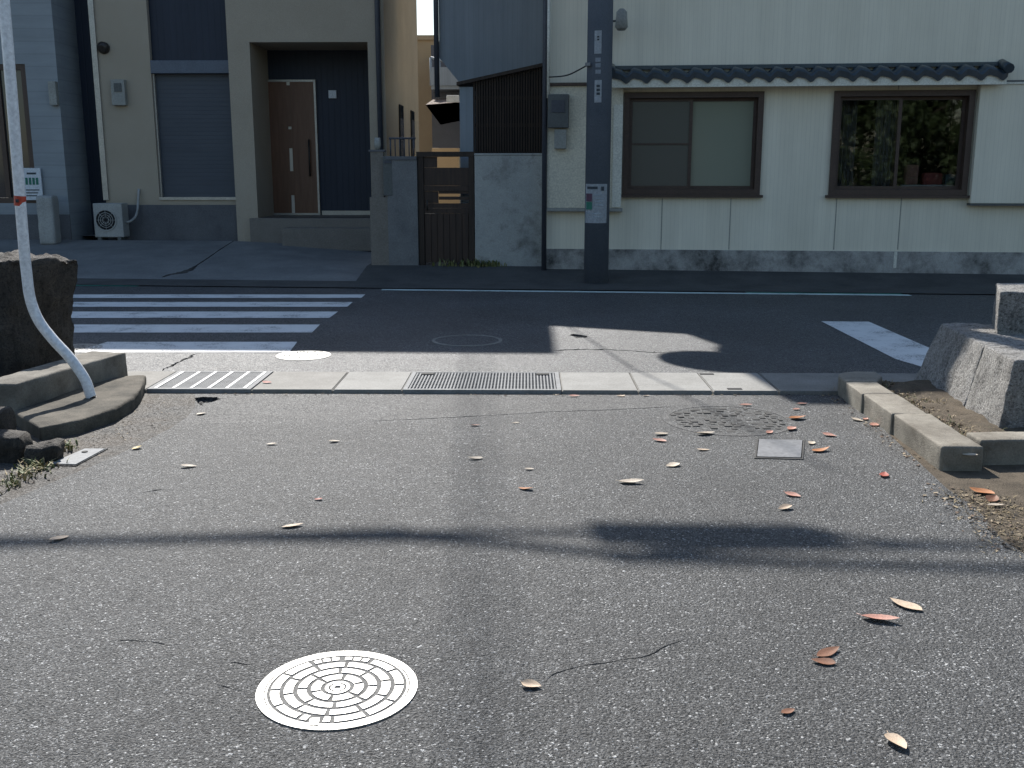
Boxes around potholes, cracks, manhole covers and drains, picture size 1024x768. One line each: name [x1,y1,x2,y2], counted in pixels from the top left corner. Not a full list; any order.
manhole cover [256,651,418,731]
manhole cover [276,350,331,361]
utility cover [754,439,805,460]
manhole cover [432,335,502,346]
utility cover [49,448,108,467]
manhole cover [662,405,796,436]
drain grate [403,372,561,394]
crack [545,639,685,683]
crack [162,354,195,371]
crack [163,241,233,277]
drain grate [147,371,273,393]
pothole [195,397,219,405]
